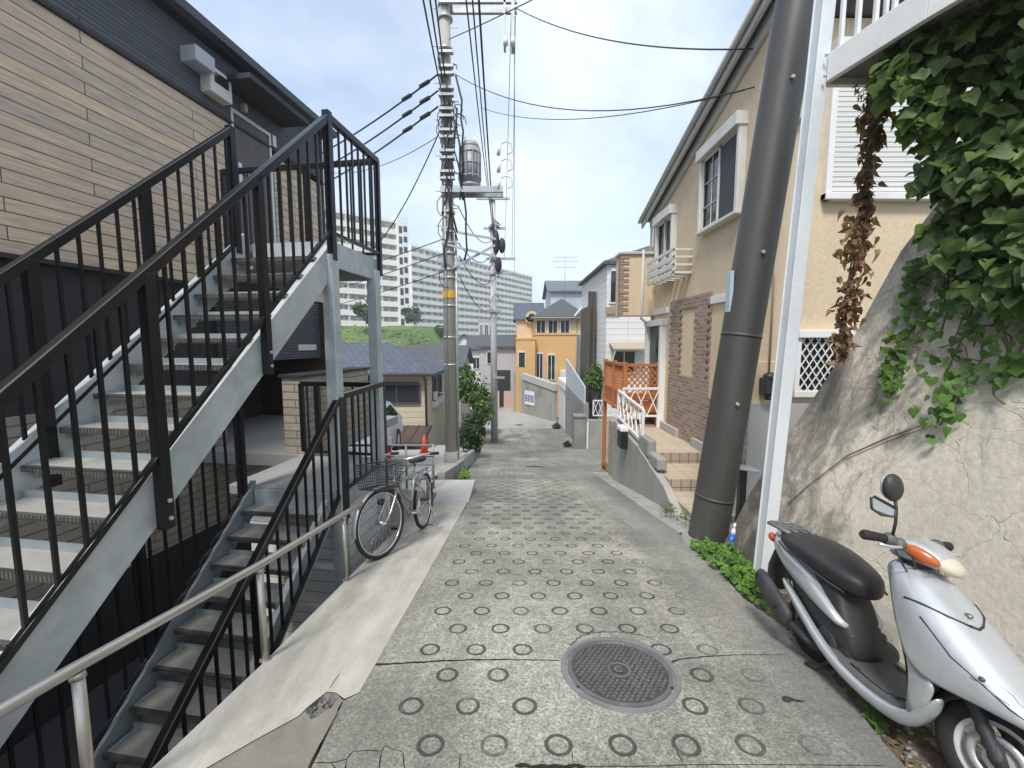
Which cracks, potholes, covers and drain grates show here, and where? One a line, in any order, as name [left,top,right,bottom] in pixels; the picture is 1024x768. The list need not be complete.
crack [671,654,787,663]
pothole [304,693,338,719]
crack [311,673,405,768]
crack [373,631,654,668]
manhole cover [561,637,682,714]
